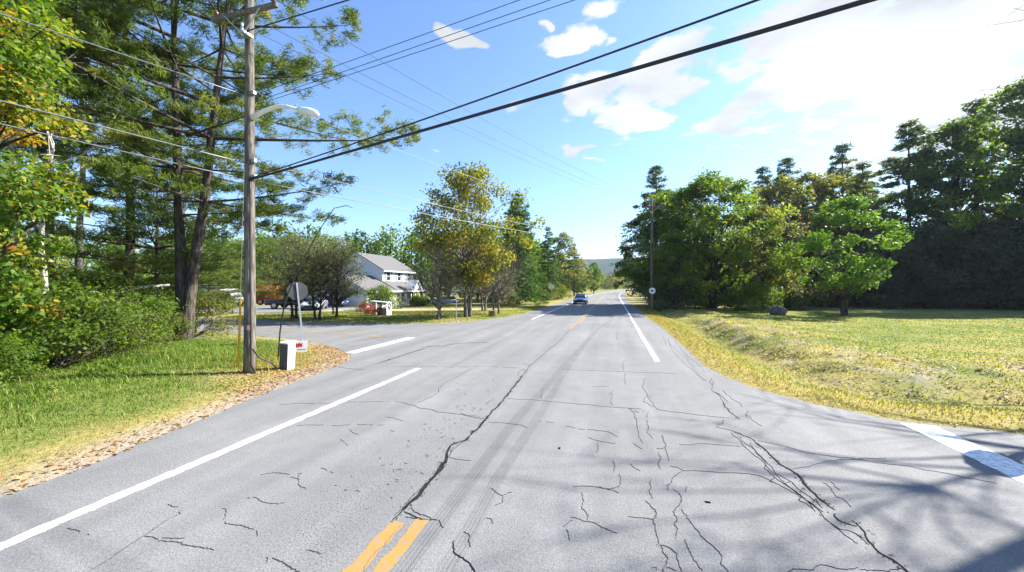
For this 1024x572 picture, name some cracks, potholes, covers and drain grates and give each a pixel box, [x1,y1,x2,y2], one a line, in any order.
crack [292,333,998,572]
crack [87,506,214,572]
